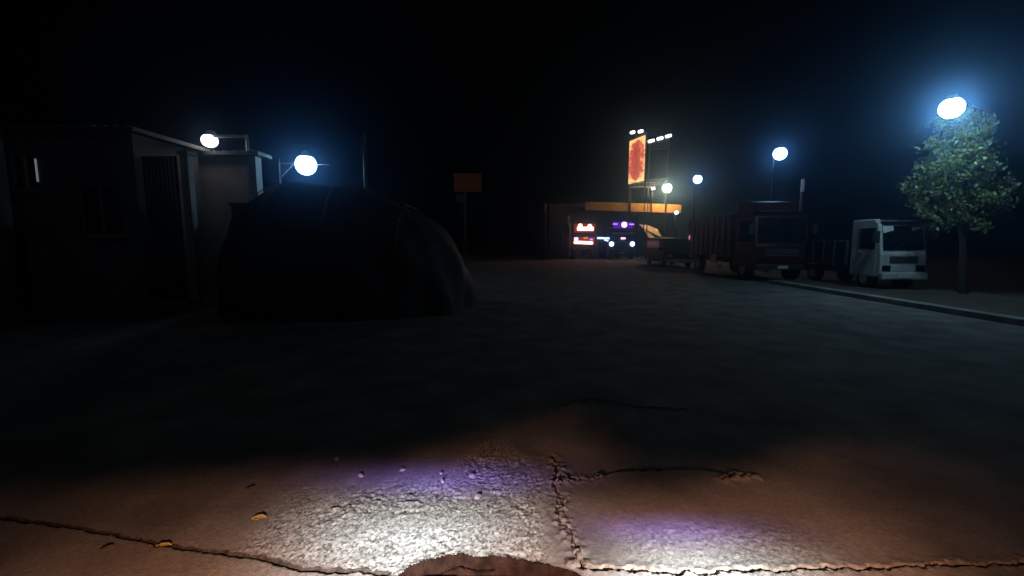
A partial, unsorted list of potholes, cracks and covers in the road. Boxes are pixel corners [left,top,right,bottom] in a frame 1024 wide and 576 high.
pothole [396,553,580,576]
crack [550,454,1024,576]
crack [0,516,392,576]
crack [555,398,687,409]
